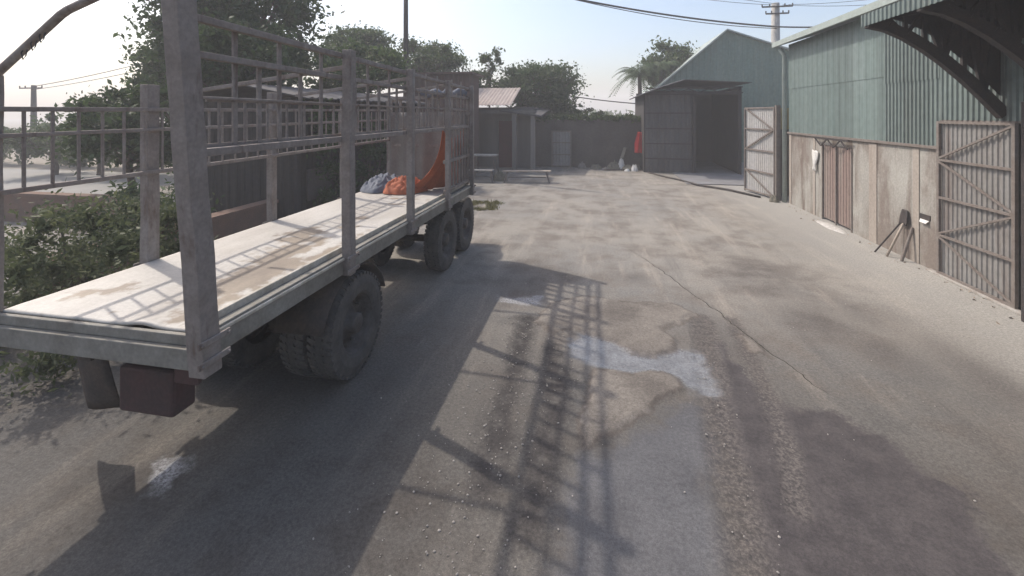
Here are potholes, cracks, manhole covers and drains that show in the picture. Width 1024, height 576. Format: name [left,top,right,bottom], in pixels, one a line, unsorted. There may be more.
crack [629,249,837,398]
